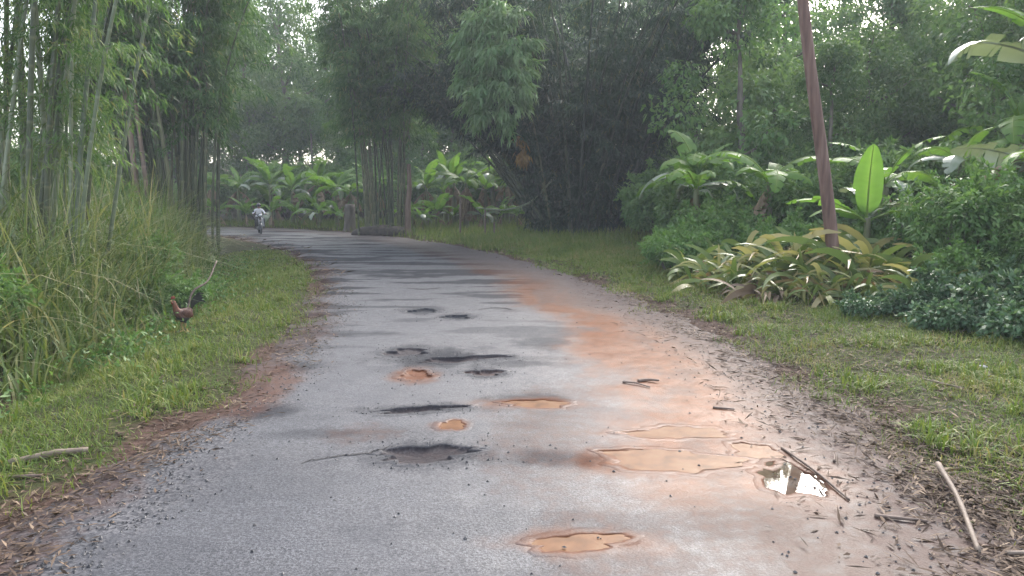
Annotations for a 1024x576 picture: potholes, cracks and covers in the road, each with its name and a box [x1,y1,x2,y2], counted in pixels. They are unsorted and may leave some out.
pothole [370,403,479,417]
crack [301,446,389,464]
pothole [586,445,759,477]
pothole [371,441,490,468]
pothole [457,368,510,378]
pothole [515,527,645,559]
pothole [744,458,842,501]
pothole [391,368,439,382]
pothole [605,423,737,442]
pothole [430,417,474,433]
pothole [376,346,434,358]
pothole [492,398,578,411]
